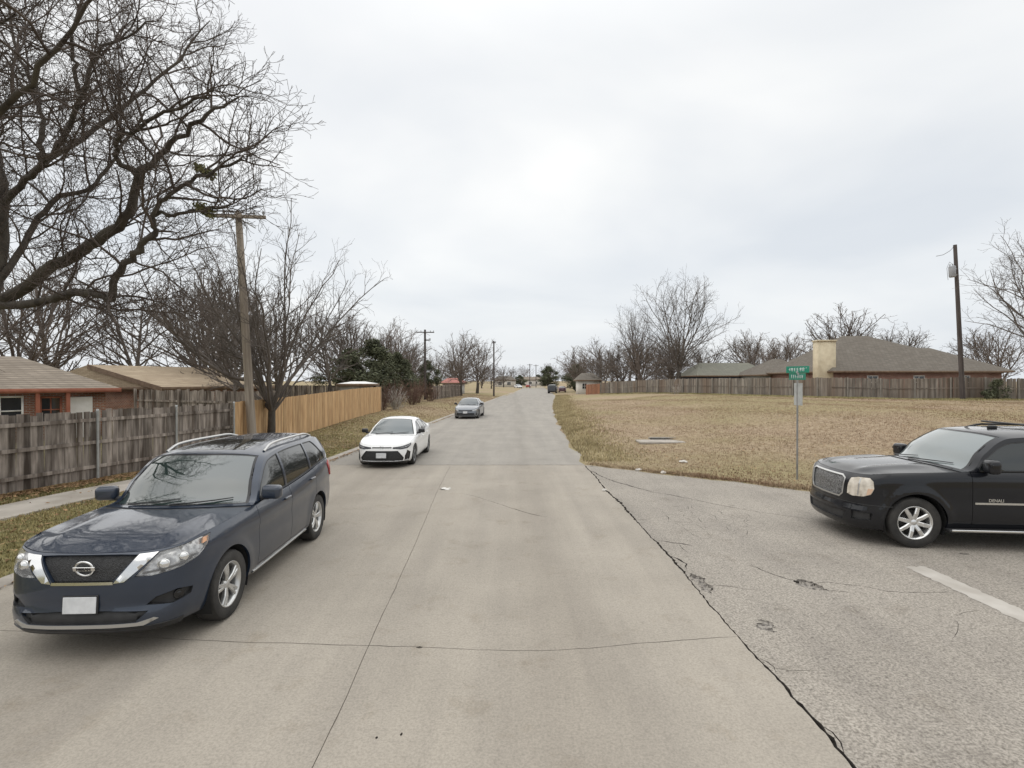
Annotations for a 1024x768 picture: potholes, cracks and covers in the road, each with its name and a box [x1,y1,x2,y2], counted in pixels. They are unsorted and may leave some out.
pothole [795,579,829,591]
pothole [756,619,777,633]
pothole [689,573,713,593]
